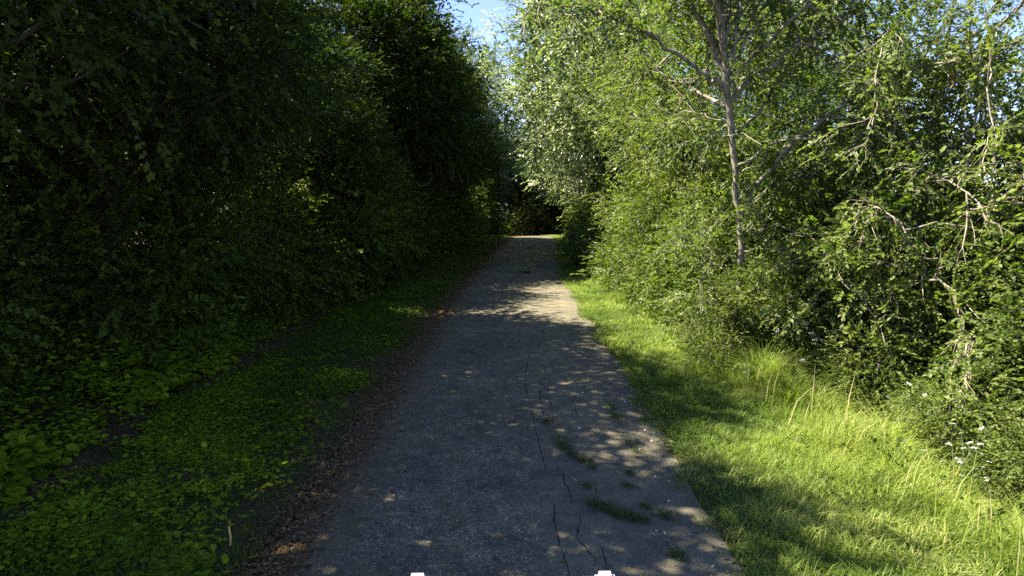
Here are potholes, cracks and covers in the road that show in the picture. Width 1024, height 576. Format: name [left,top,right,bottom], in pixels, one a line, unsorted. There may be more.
crack [556,465,611,569]
